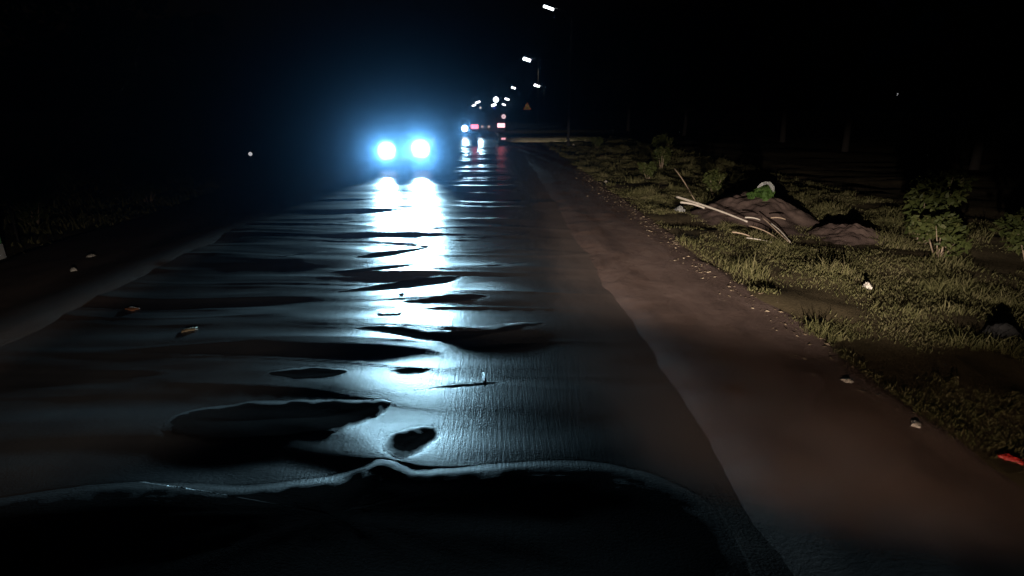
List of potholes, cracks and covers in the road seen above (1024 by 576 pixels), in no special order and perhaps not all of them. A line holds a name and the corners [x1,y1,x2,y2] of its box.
pothole [459,343,533,353]
pothole [356,321,547,341]
pothole [266,367,349,381]
pothole [382,426,439,459]
pothole [160,399,392,446]
